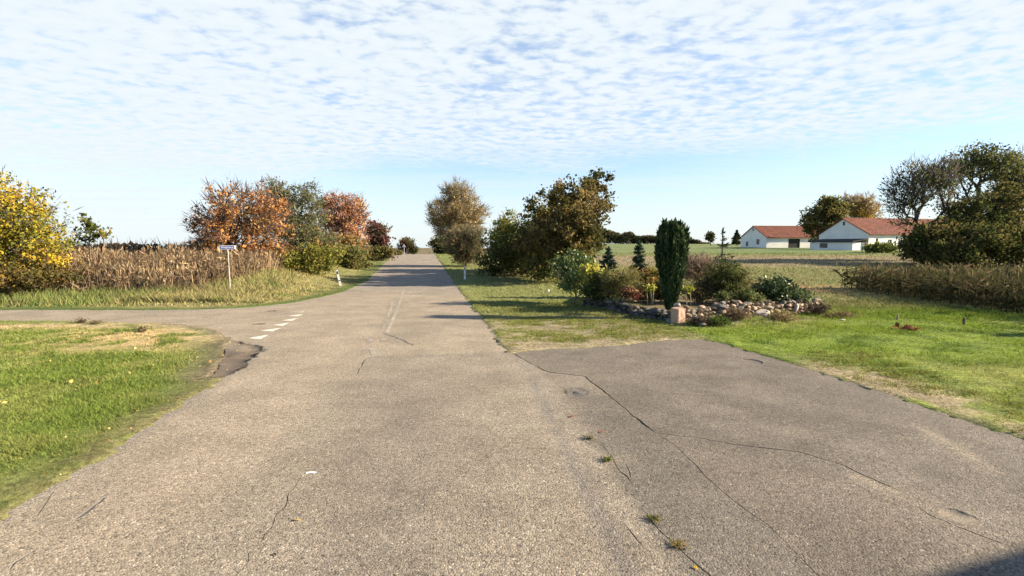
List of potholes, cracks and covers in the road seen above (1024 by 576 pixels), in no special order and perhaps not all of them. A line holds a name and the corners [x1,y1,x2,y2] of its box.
crack [914,504,1022,546]
crack [514,354,904,576]
pothole [211,341,264,377]
pothole [938,508,981,526]
pothole [564,387,589,397]
crack [37,487,125,525]
crack [236,477,301,576]
